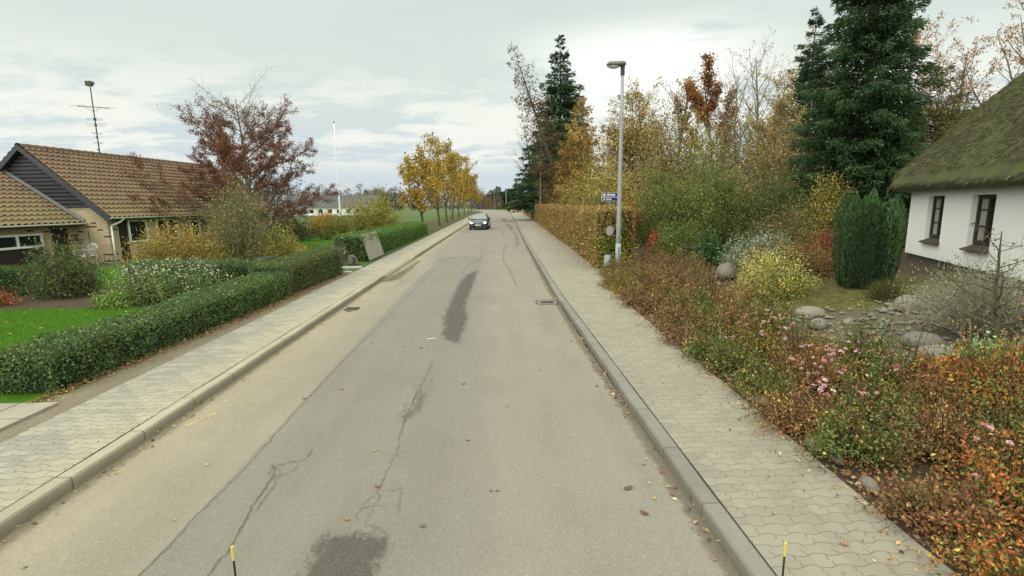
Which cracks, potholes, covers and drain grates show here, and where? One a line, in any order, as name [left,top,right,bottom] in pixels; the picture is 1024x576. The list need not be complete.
crack [358,360,433,536]
crack [207,445,315,575]
